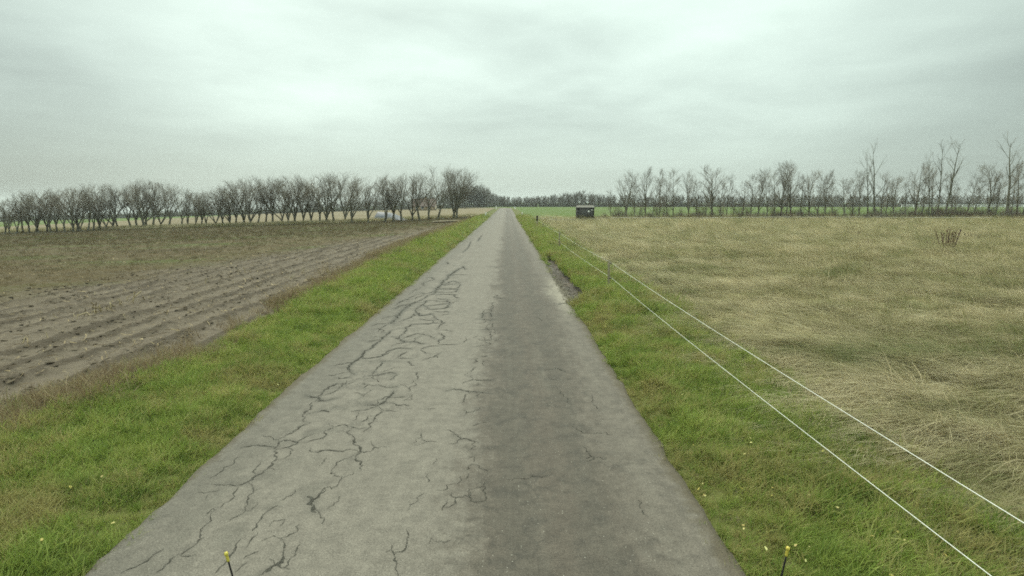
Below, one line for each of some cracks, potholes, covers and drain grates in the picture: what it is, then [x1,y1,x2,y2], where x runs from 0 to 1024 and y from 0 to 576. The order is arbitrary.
crack [121,236,481,574]
crack [409,295,502,510]
